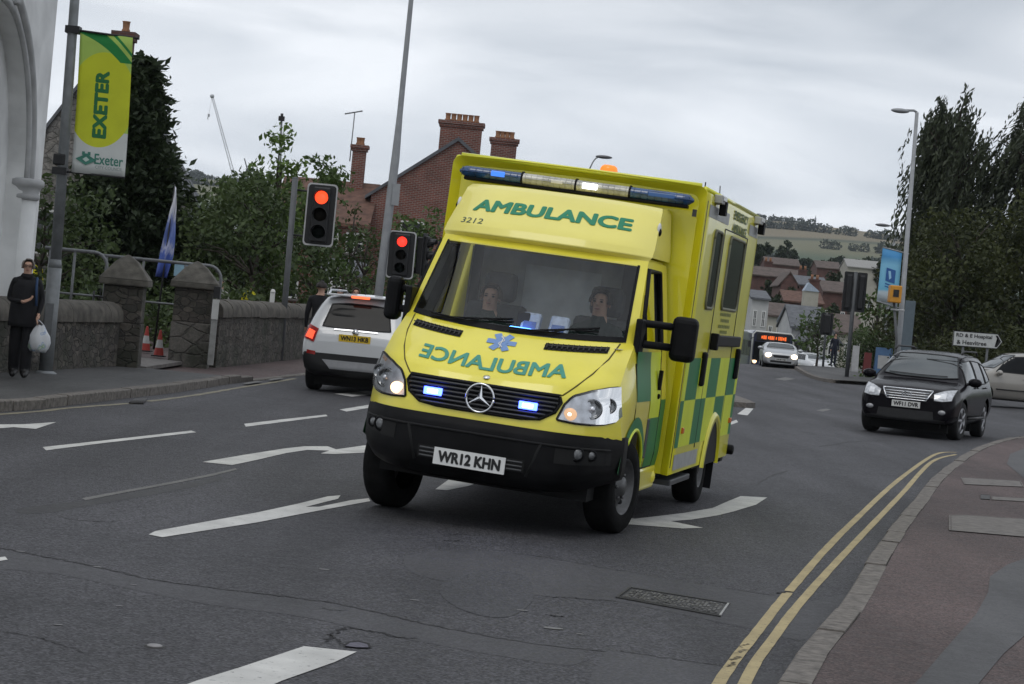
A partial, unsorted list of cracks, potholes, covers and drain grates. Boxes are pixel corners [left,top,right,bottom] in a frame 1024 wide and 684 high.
manhole cover [616,587,730,617]
crack [321,606,401,644]
